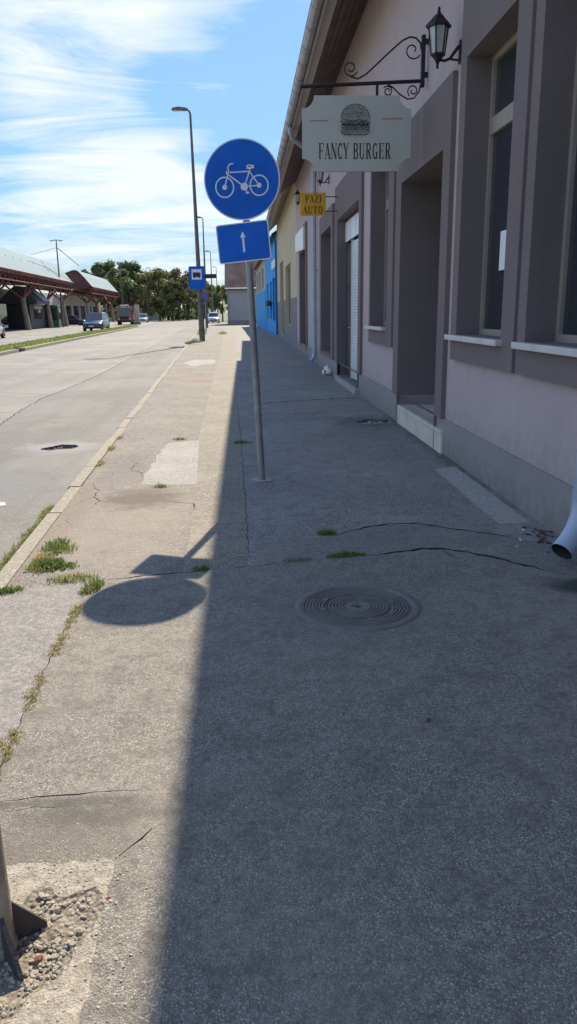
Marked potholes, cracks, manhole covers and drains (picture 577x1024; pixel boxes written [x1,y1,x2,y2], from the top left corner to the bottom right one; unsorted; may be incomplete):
crack [333,523,560,573]
crack [3,790,138,812]
crack [115,828,152,859]
pothole [0,886,105,1024]
crack [0,350,143,426]
manhole cover [296,584,421,631]
